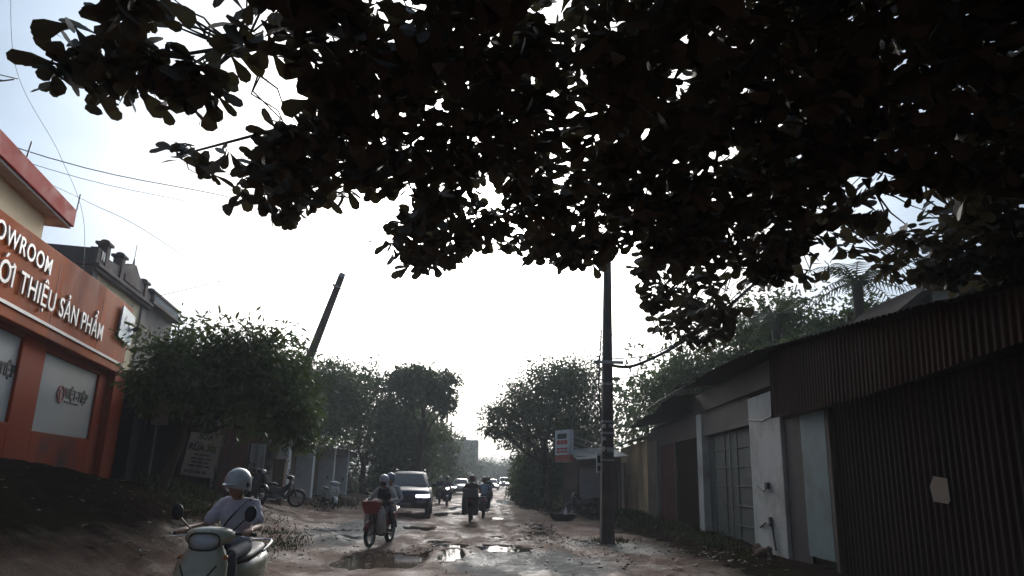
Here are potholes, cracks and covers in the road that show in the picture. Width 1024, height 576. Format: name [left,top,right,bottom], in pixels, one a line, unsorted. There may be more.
pothole [321,550,443,572]
pothole [429,547,471,563]
pothole [468,544,541,554]
